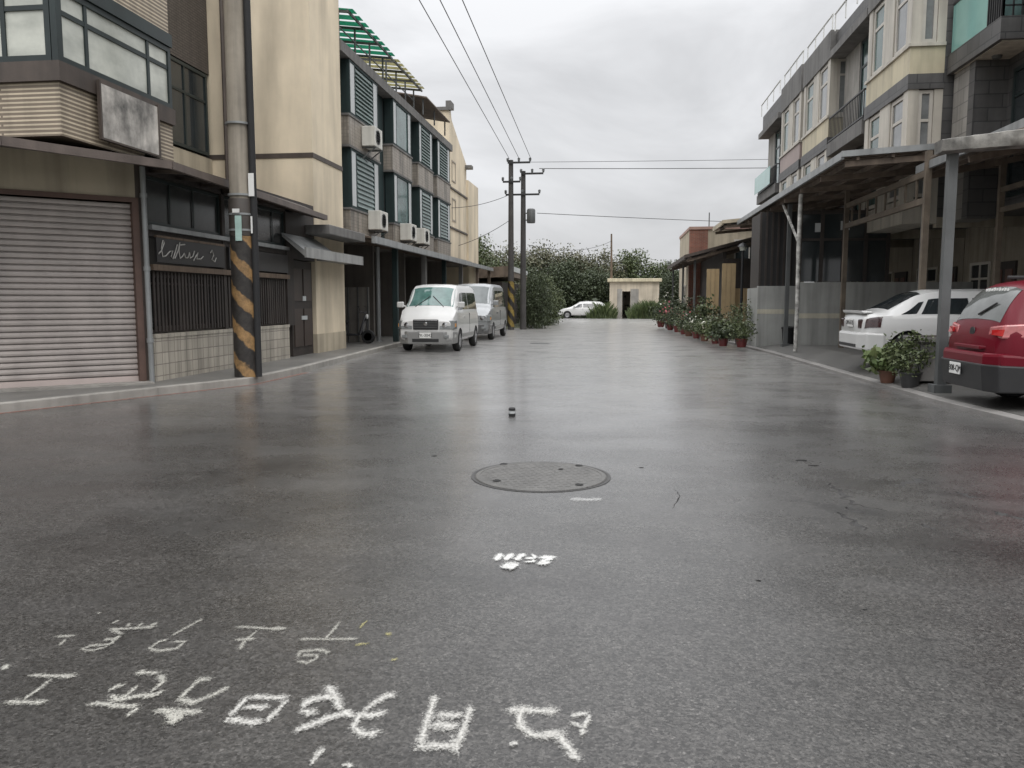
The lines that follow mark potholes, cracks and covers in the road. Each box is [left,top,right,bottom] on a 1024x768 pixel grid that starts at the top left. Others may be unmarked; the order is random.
manhole cover [471,462,611,493]
crack [828,483,886,530]
